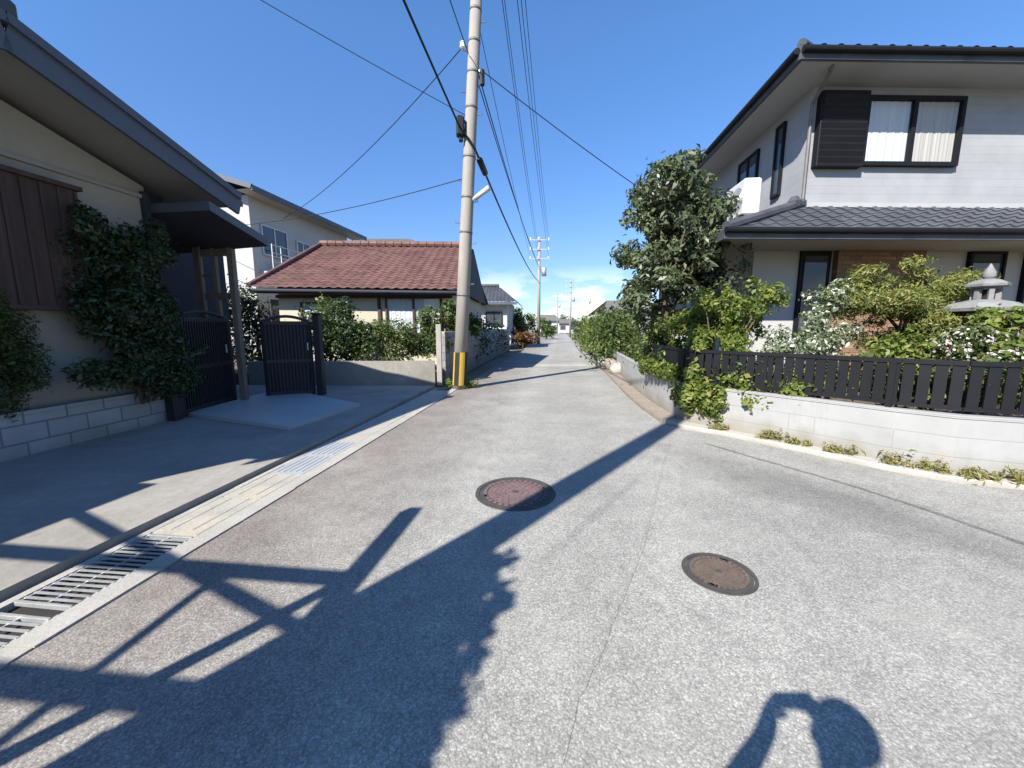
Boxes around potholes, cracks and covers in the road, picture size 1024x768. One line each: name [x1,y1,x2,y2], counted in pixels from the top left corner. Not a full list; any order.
drain grate [14,533,195,611]
manhole cover [475,477,556,511]
manhole cover [681,552,759,596]
drain grate [0,612,57,649]
